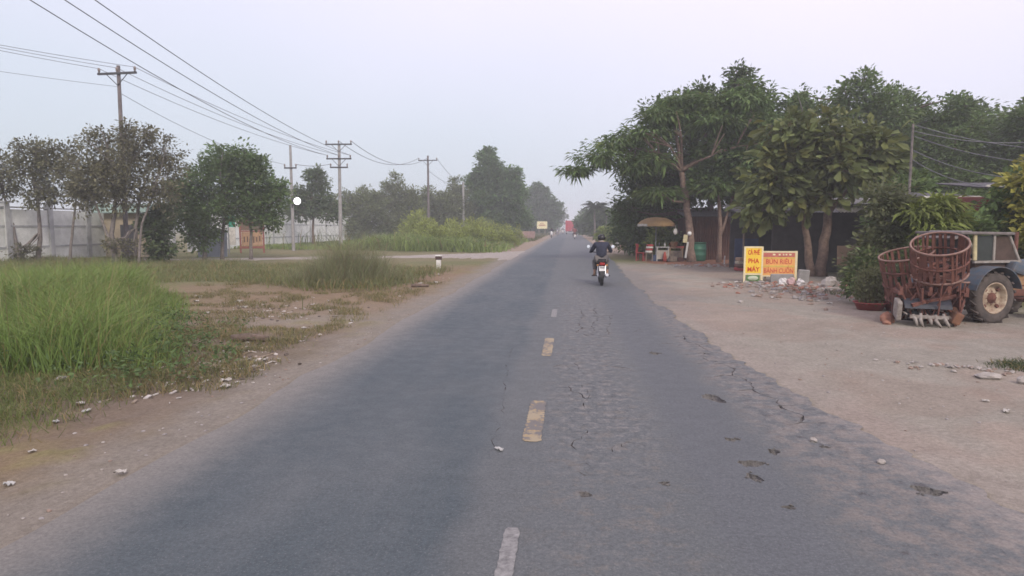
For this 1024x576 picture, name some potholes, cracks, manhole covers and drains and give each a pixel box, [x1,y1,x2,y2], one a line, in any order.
pothole [701,394,726,403]
crack [660,336,822,426]
pothole [910,485,948,496]
crack [576,309,613,337]
